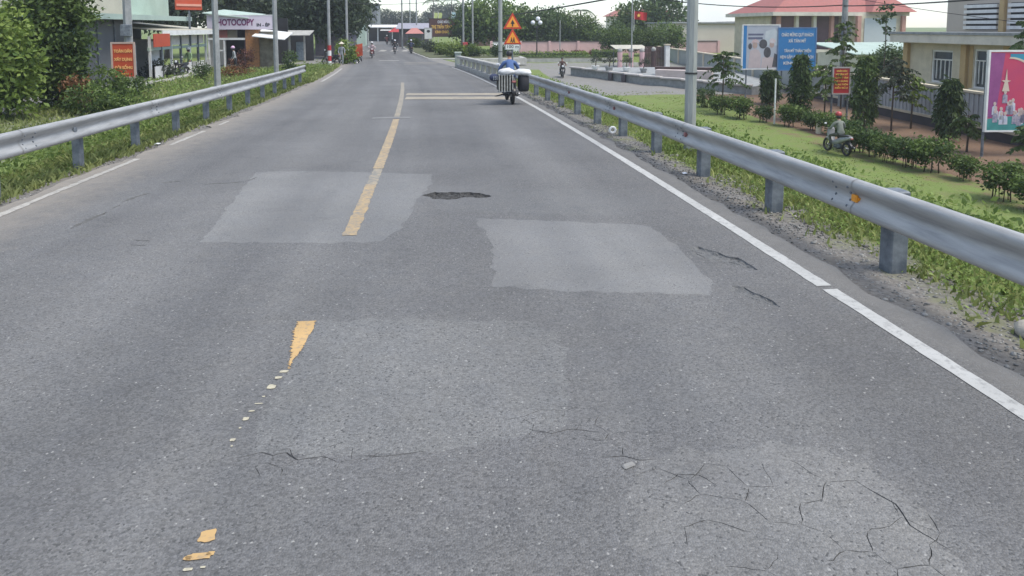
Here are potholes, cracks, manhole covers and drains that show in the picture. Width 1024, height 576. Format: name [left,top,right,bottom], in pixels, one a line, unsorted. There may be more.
crack [504,406,950,576]
crack [238,443,427,475]
pothole [423,192,491,200]
